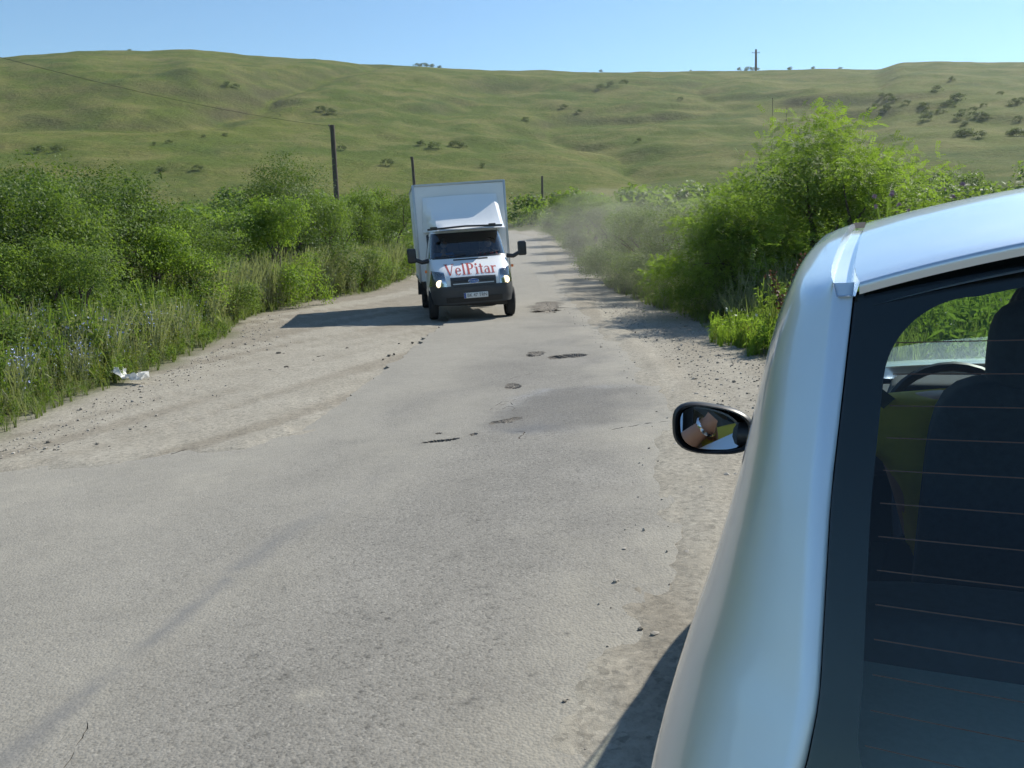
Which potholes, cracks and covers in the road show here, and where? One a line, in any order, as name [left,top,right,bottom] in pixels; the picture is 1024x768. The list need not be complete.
pothole [530,301,569,313]
pothole [489,417,523,425]
